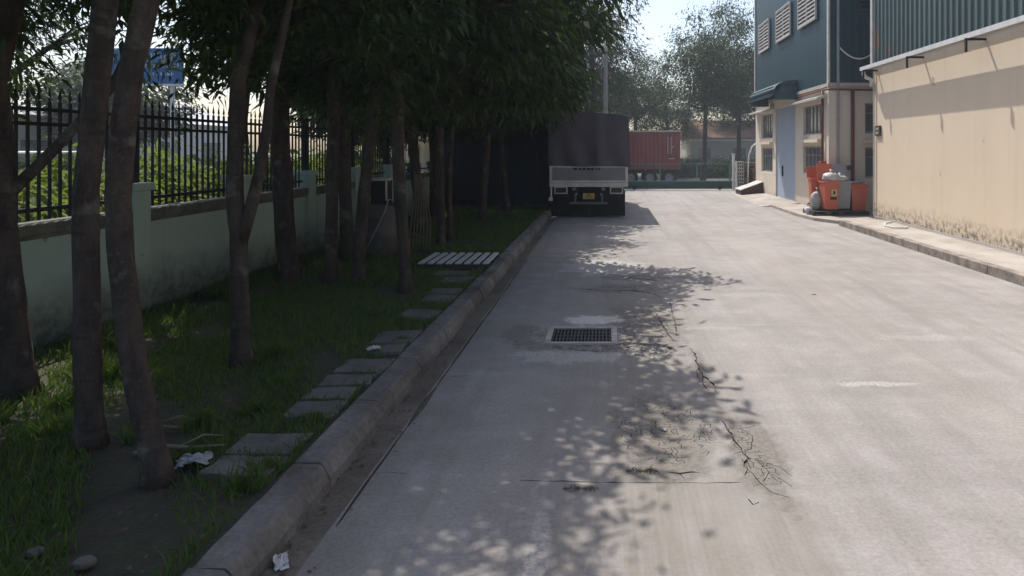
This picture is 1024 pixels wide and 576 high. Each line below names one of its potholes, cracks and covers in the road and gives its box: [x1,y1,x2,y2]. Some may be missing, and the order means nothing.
crack [618,302,717,393]
crack [520,405,792,505]
